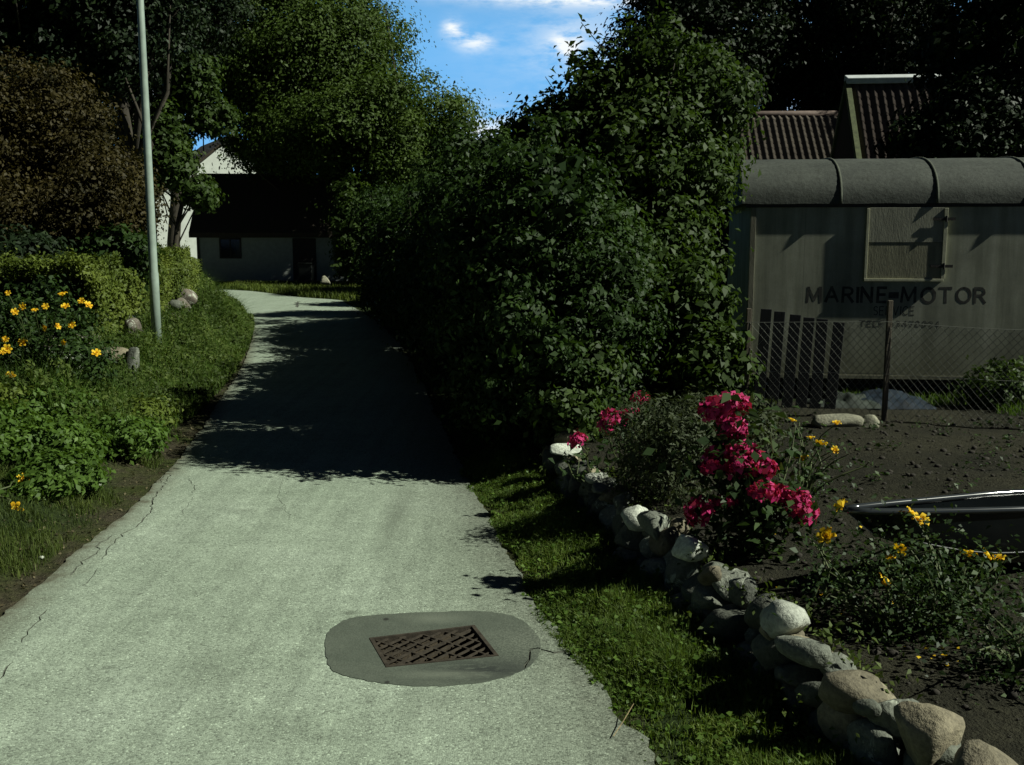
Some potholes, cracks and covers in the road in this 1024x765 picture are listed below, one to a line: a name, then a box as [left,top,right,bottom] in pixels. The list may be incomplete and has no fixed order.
crack [71,475,171,584]
drain grate [369,625,499,667]
crack [524,648,571,669]
